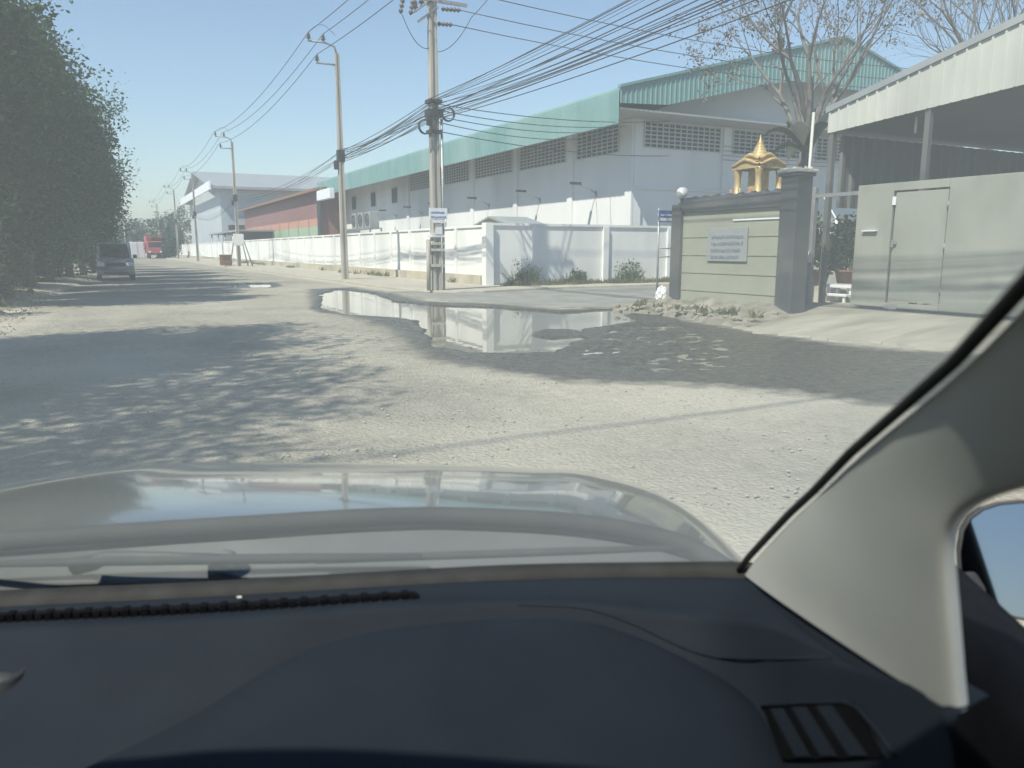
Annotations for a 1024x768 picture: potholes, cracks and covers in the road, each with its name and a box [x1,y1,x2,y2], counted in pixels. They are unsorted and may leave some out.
pothole [315,289,640,352]
